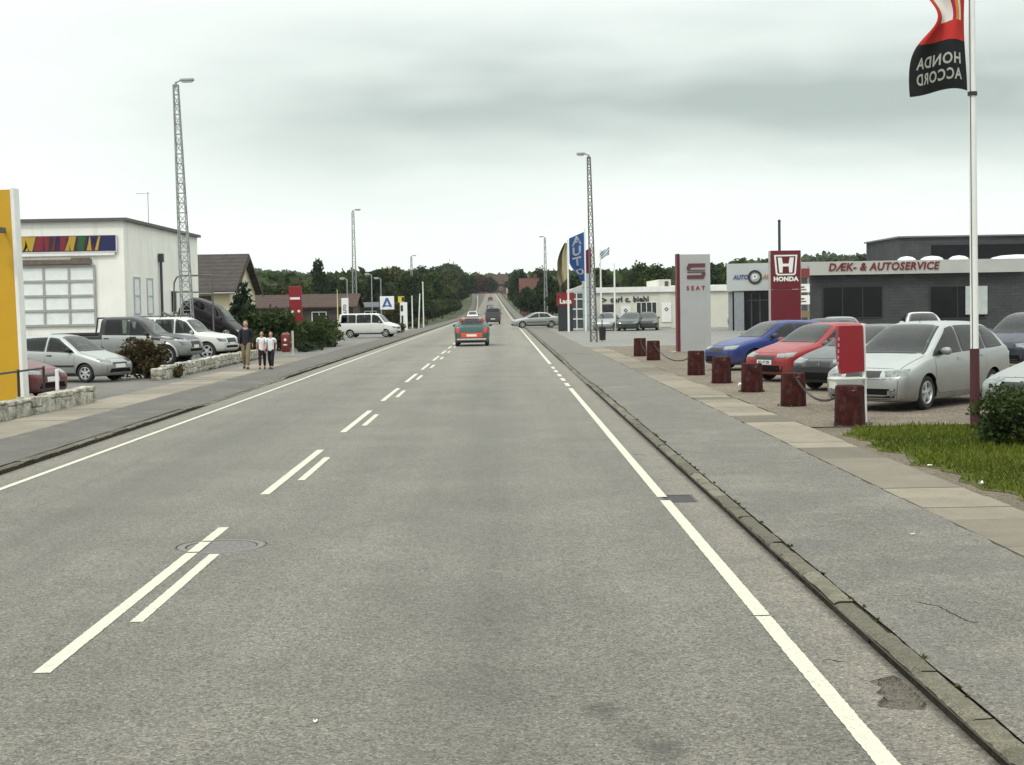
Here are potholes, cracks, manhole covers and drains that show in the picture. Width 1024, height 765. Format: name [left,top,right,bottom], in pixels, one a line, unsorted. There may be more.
pothole [869,675,927,710]
manhole cover [175,538,268,553]
drain grate [660,494,699,503]
